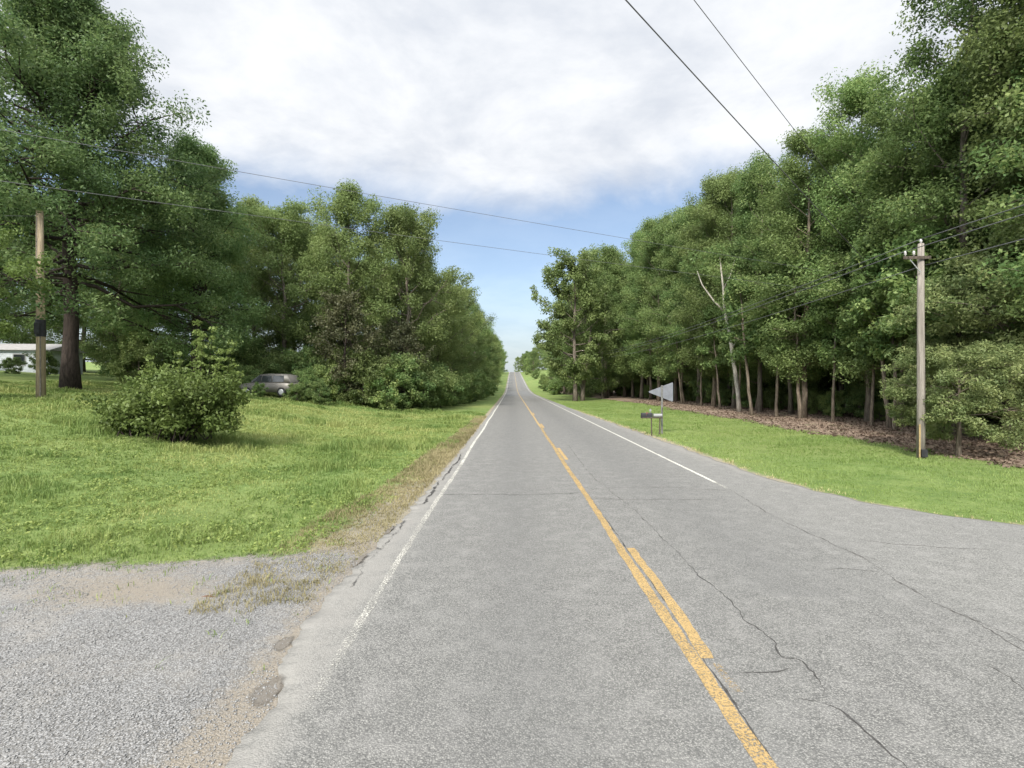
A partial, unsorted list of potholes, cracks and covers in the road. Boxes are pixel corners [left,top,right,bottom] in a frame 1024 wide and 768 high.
pothole [274,636,294,651]
pothole [250,676,283,706]
crack [801,698,907,767]
crack [570,448,825,760]
